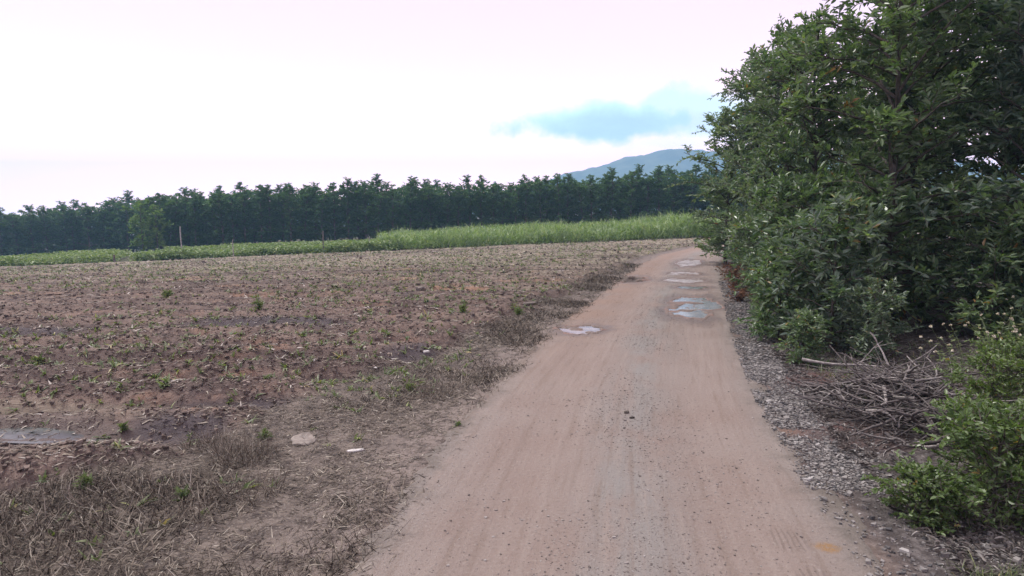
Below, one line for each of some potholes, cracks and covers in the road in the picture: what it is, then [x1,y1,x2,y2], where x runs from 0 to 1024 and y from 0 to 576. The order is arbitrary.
pothole [673,260,703,268]
pothole [663,296,725,321]
pothole [552,324,608,335]
